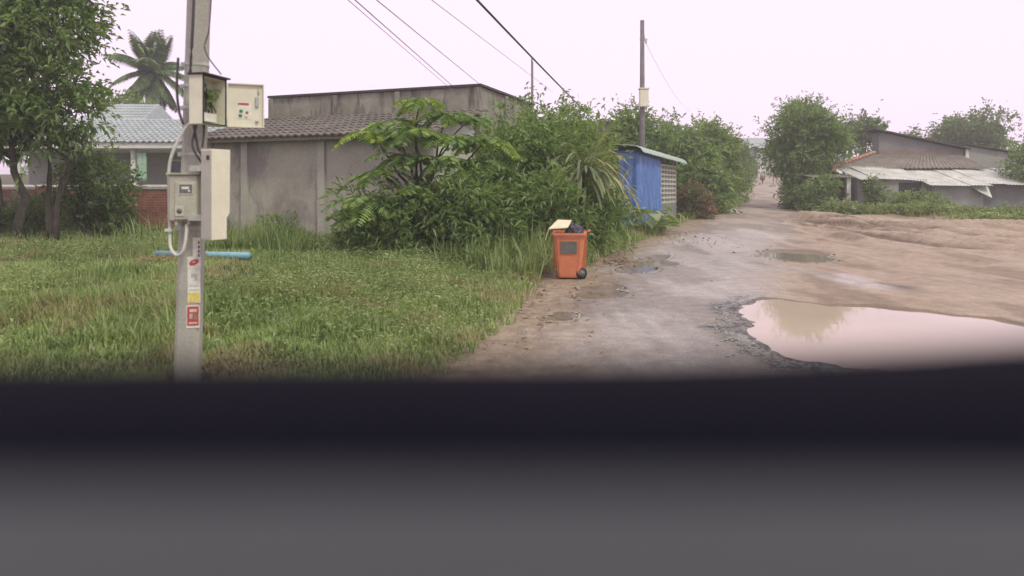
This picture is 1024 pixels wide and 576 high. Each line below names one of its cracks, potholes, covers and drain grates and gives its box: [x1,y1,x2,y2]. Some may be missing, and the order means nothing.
pothole [536,310,581,323]
pothole [609,252,685,275]
pothole [750,248,844,264]
pothole [572,282,634,301]
pothole [700,294,1024,357]
